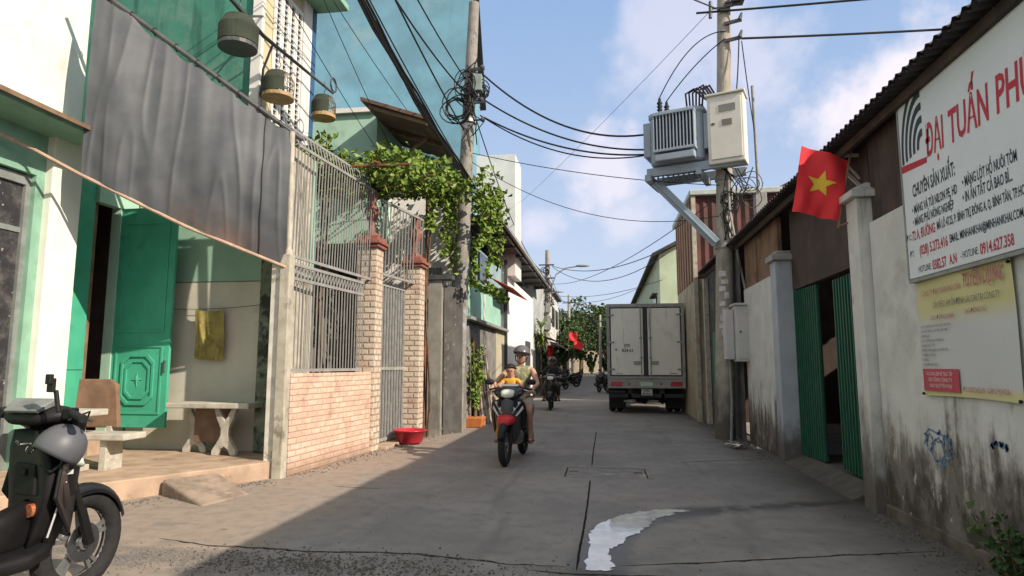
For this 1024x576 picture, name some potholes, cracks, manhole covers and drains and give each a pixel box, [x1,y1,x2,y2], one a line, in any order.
manhole cover [560,466,653,479]
